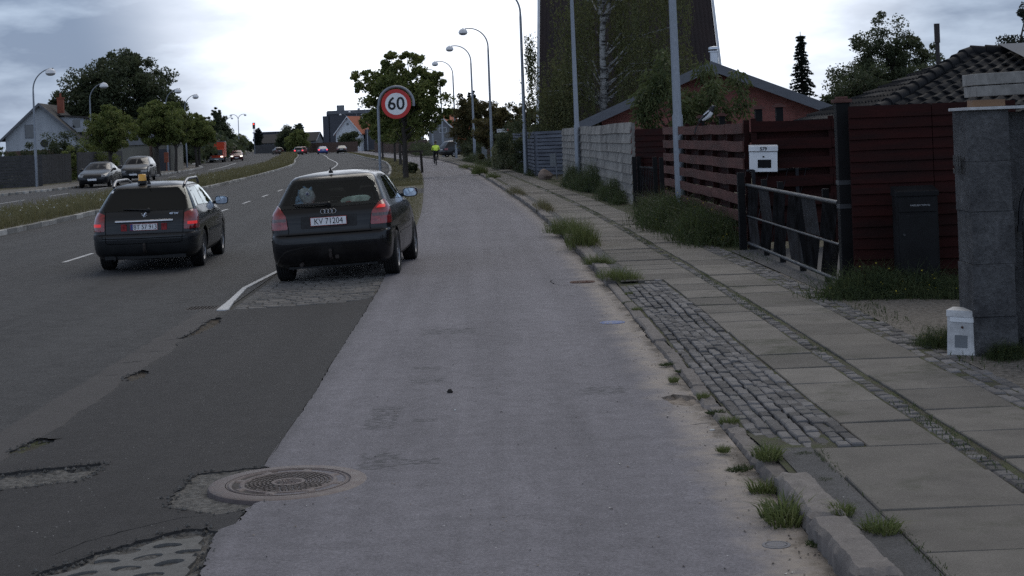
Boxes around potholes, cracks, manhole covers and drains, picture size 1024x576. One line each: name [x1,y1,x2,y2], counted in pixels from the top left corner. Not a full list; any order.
pothole [121,370,150,381]
pothole [160,464,282,515]
manhole cover [762,541,791,549]
pothole [5,436,61,454]
pothole [32,522,218,576]
crack [52,515,208,556]
pothole [0,461,111,490]
pothole [177,317,222,339]
manhole cover [207,465,367,505]
